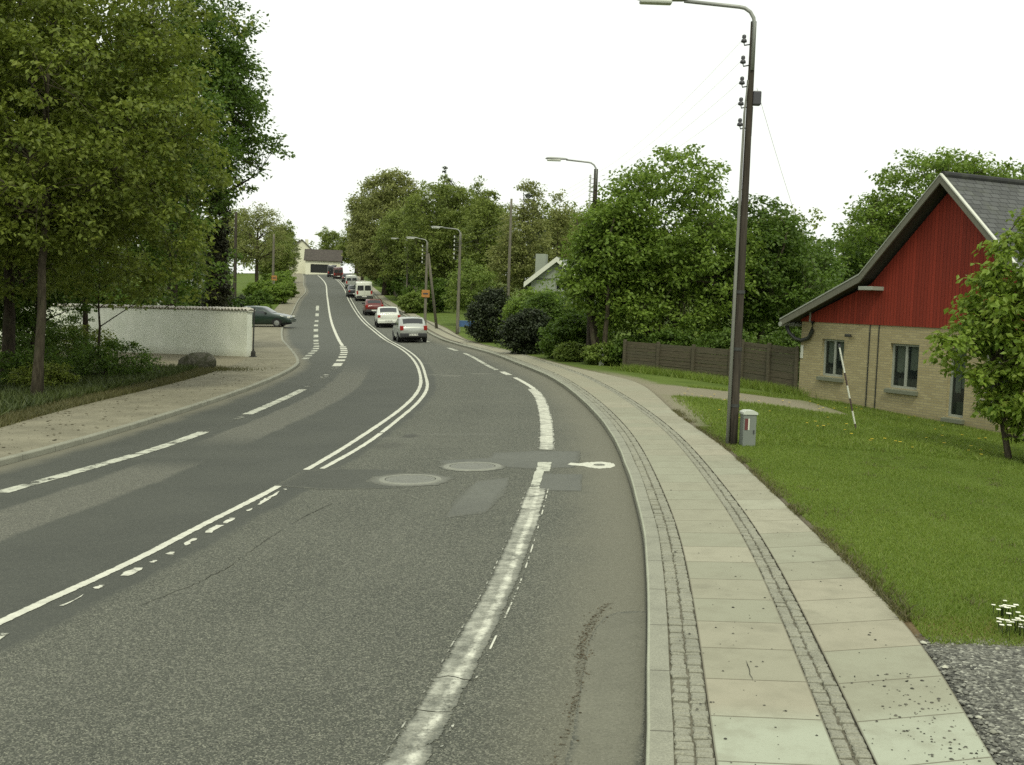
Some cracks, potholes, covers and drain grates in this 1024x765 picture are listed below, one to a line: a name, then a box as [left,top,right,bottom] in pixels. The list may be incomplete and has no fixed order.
manhole cover [366,473,455,487]
manhole cover [438,462,507,472]
crack [142,504,331,605]
